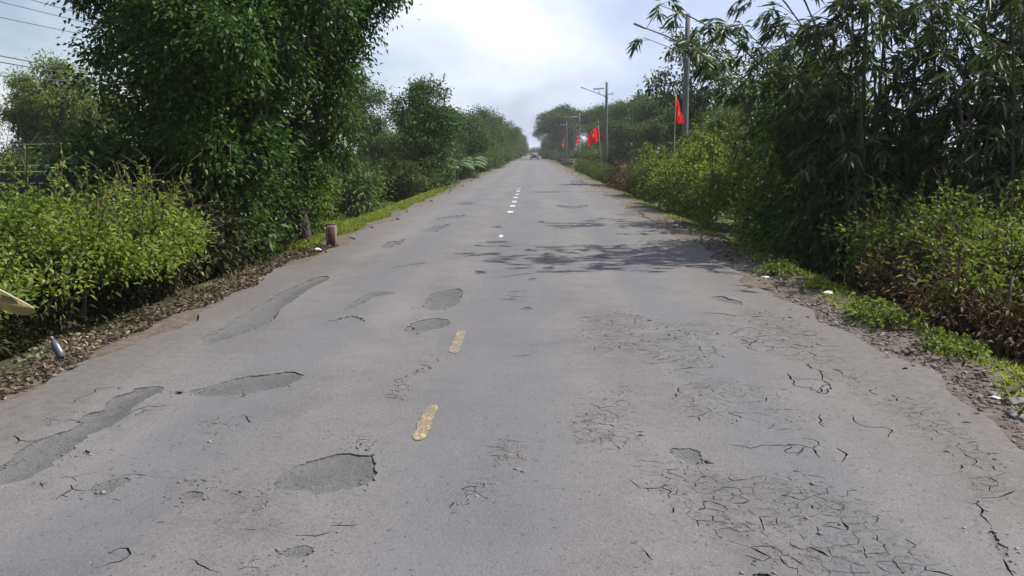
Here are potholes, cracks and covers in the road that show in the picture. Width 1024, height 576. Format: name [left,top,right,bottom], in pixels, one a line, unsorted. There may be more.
pothole [202,276,329,344]
crack [38,472,96,500]
crack [449,440,521,507]
crack [645,469,952,576]
pothole [274,453,378,495]
pothole [422,289,463,310]
crack [104,548,132,566]
pothole [670,448,703,466]
pothole [277,545,313,558]
crack [675,381,848,462]
crack [628,459,685,498]
crack [579,311,726,376]
